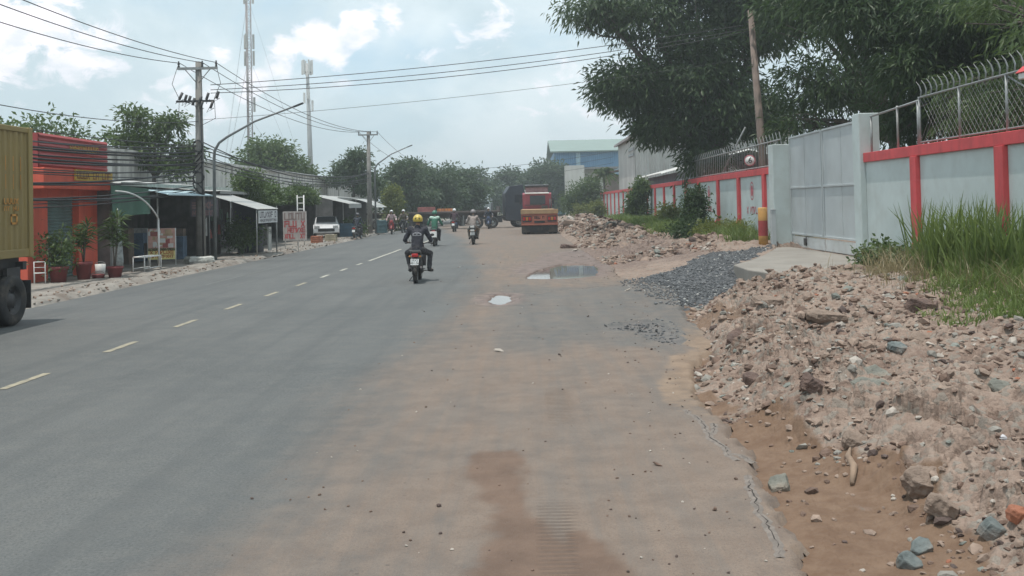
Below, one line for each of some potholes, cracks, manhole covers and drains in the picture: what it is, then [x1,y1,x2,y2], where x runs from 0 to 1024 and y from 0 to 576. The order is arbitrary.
crack [683,409,786,558]
pothole [469,292,531,307]
pothole [510,263,614,281]
